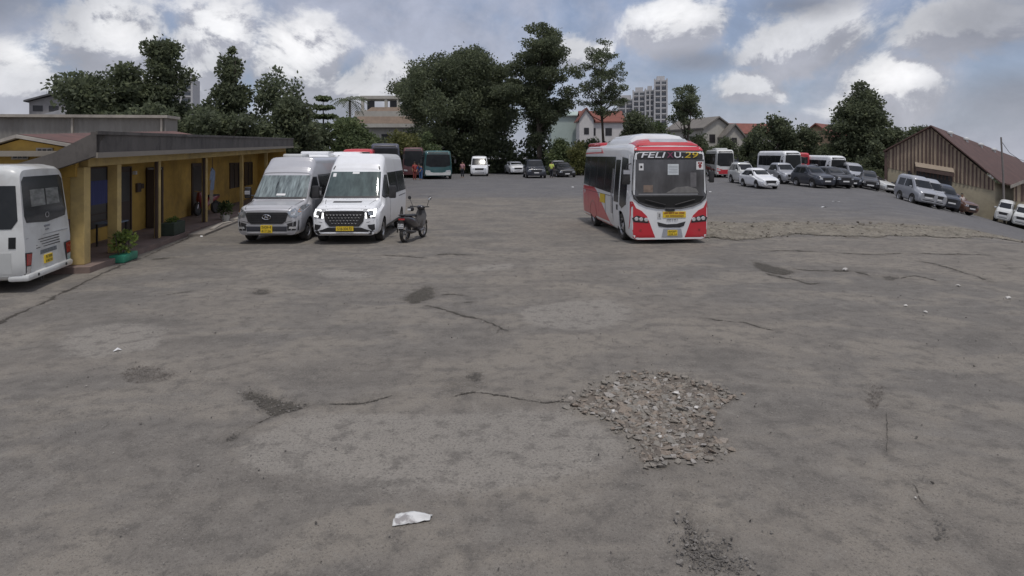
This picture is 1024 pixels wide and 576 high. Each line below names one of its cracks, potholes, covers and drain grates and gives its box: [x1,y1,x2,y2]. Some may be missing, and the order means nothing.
pothole [243,391,306,416]
pothole [121,366,175,383]
pothole [404,287,434,303]
crack [902,261,984,281]
pothole [575,375,728,461]
crack [426,293,504,334]
pothole [679,518,743,573]
crack [766,269,866,285]
